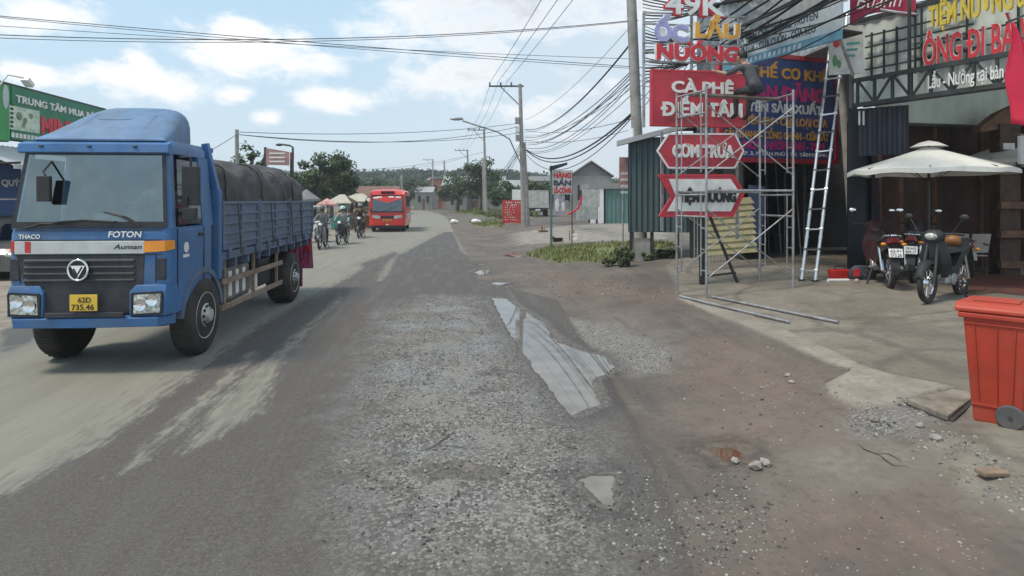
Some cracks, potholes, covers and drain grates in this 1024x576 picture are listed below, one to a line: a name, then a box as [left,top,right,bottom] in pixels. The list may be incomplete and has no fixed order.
pothole [695,442,761,465]
pothole [485,296,621,421]
pothole [567,471,625,512]
